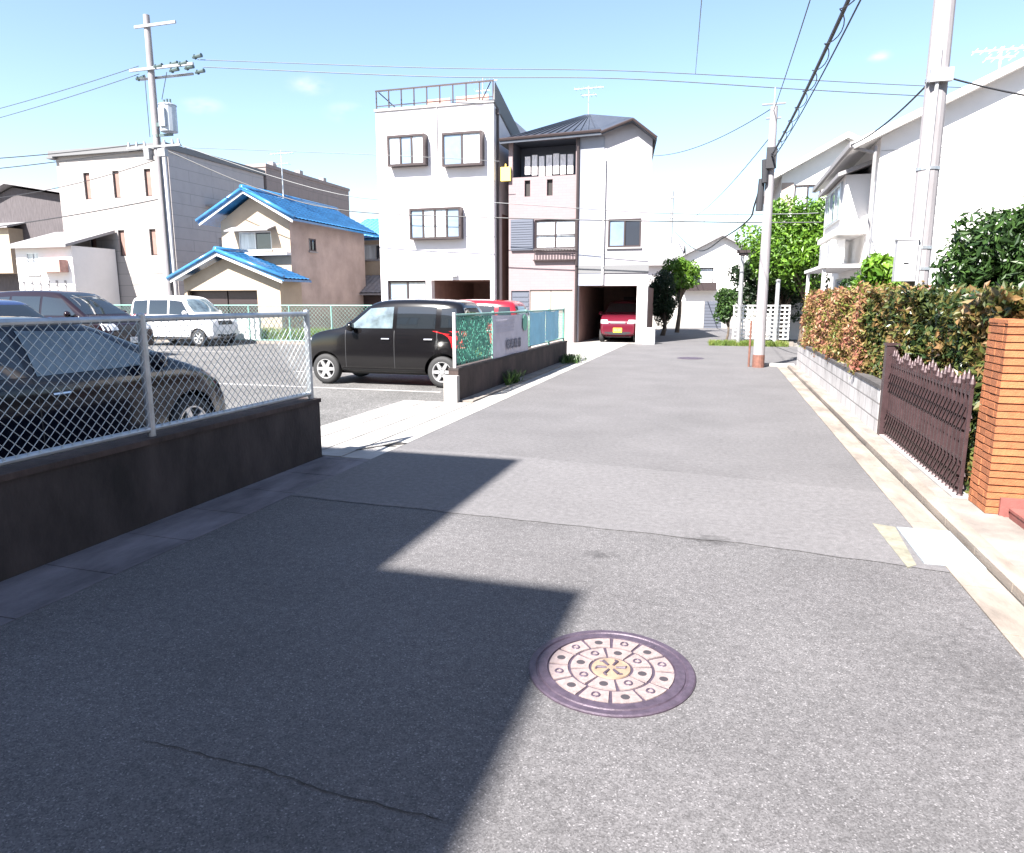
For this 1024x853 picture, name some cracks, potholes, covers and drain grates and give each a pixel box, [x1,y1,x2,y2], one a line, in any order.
crack [141,739,441,820]
manhole cover [529,630,696,718]
